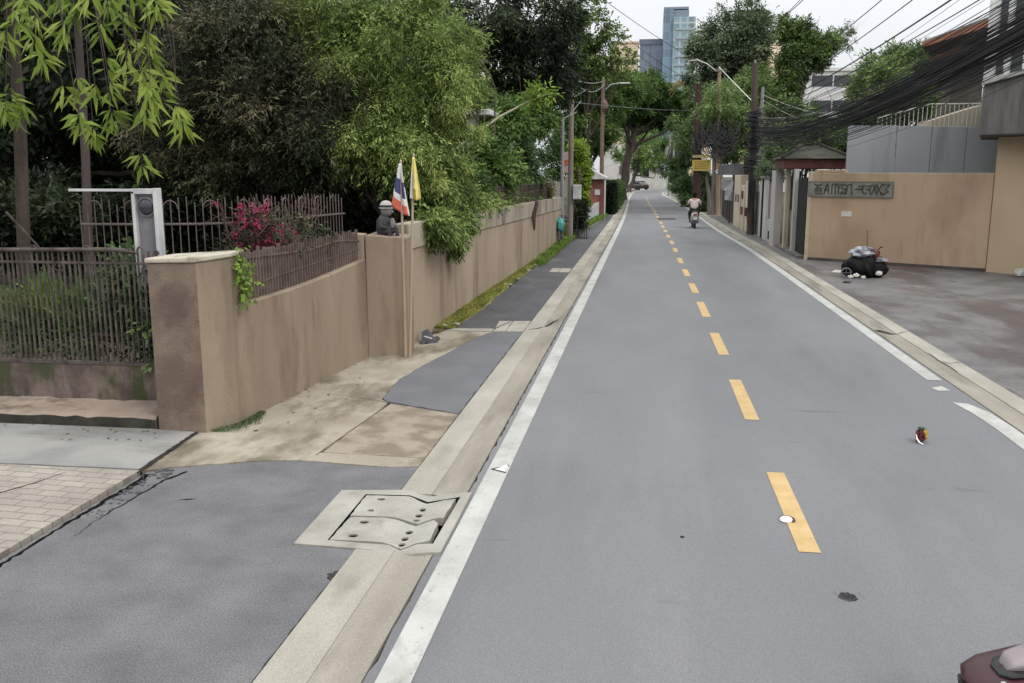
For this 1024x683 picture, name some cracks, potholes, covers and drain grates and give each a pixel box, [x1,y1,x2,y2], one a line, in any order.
manhole cover [294,490,472,557]
crack [0,469,192,568]
pothole [835,592,861,602]
